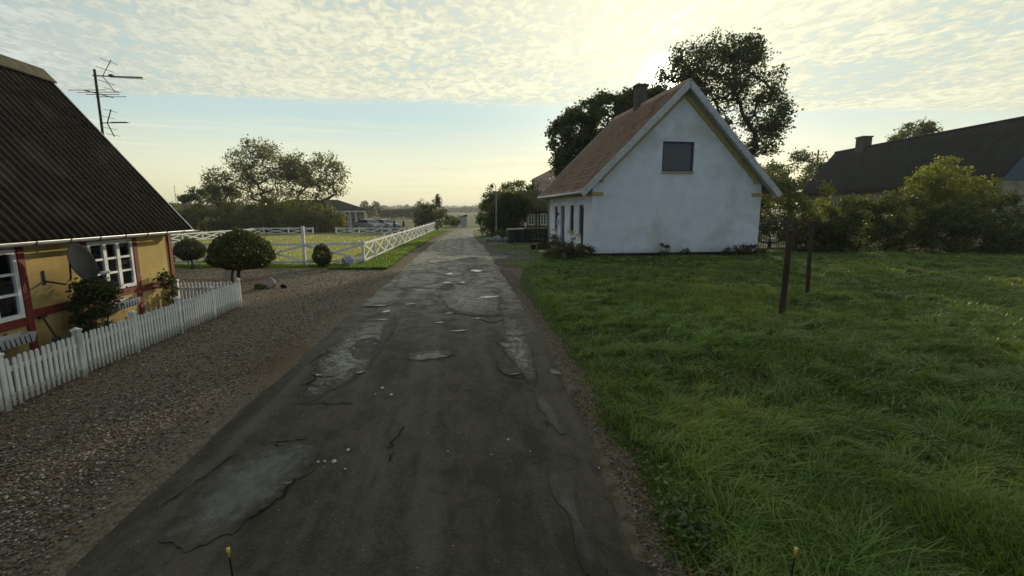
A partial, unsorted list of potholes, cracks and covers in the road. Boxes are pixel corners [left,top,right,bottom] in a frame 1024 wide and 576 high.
pothole [501,314,539,387]
pothole [296,313,394,404]
pothole [405,348,454,361]
pothole [496,355,521,376]
crack [387,426,404,462]
pothole [496,340,524,348]
pothole [437,281,504,315]
